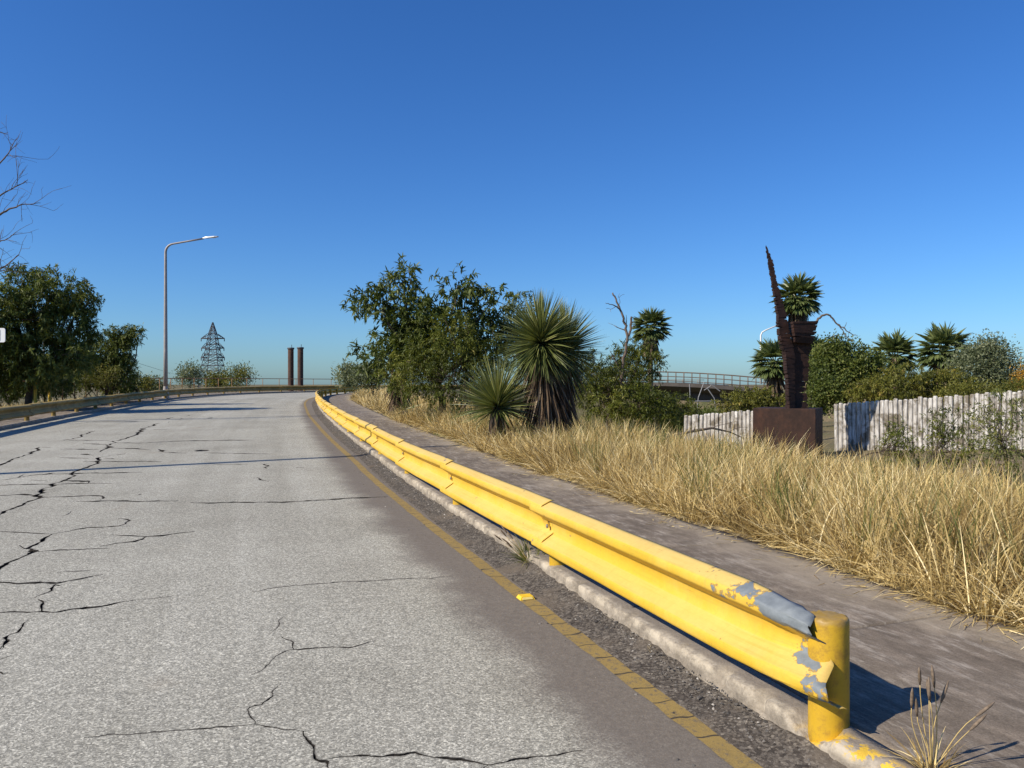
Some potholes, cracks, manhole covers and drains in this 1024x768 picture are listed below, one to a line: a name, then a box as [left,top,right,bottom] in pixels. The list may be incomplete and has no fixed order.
crack [0,417,269,674]
crack [84,684,583,768]
crack [254,577,438,592]
